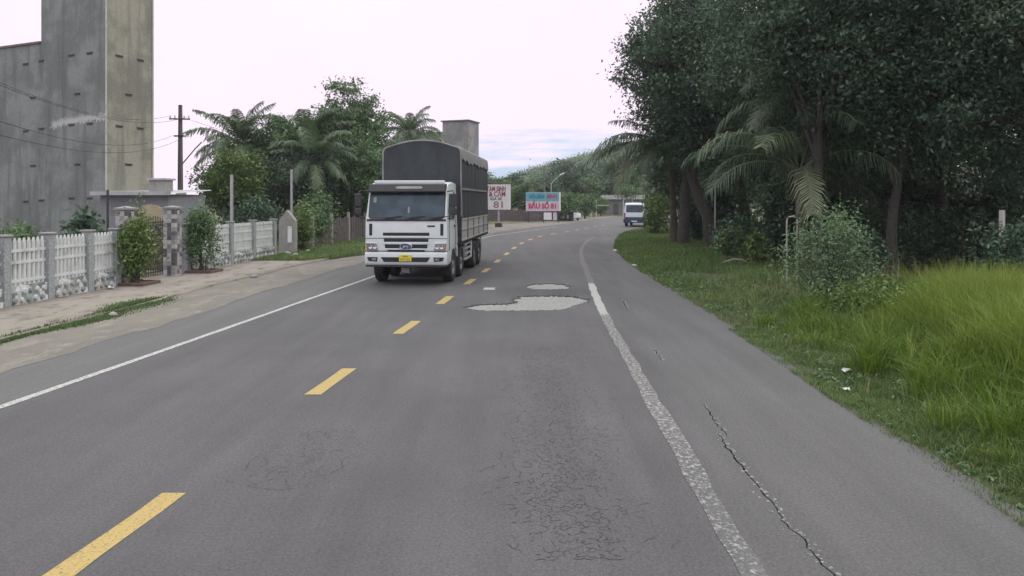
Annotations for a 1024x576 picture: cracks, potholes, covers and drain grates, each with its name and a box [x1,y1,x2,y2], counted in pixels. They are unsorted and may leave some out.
crack [226,430,361,490]
crack [477,347,676,561]
crack [703,404,842,576]
pothole [461,295,590,311]
